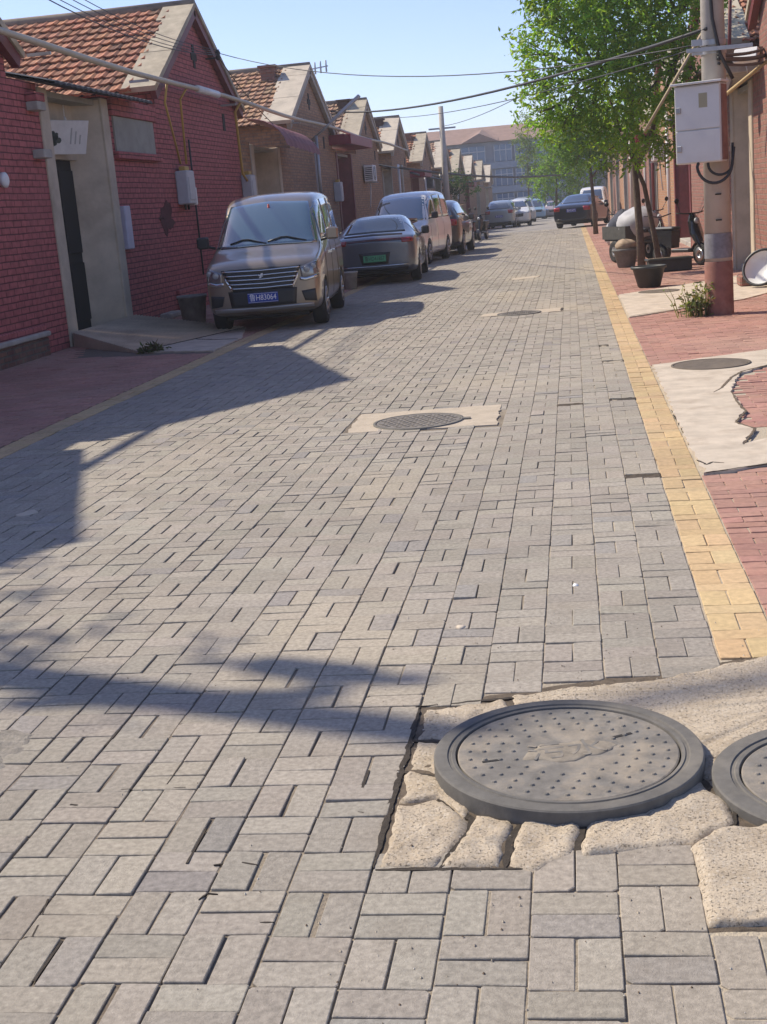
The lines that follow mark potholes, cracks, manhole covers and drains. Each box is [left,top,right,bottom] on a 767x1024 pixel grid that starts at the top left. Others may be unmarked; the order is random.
manhole cover [373,413,471,430]
crack [671,410,767,473]
manhole cover [671,358,751,370]
crack [358,668,713,872]
manhole cover [434,700,705,827]
manhole cover [712,729,767,827]
crack [714,365,767,444]
